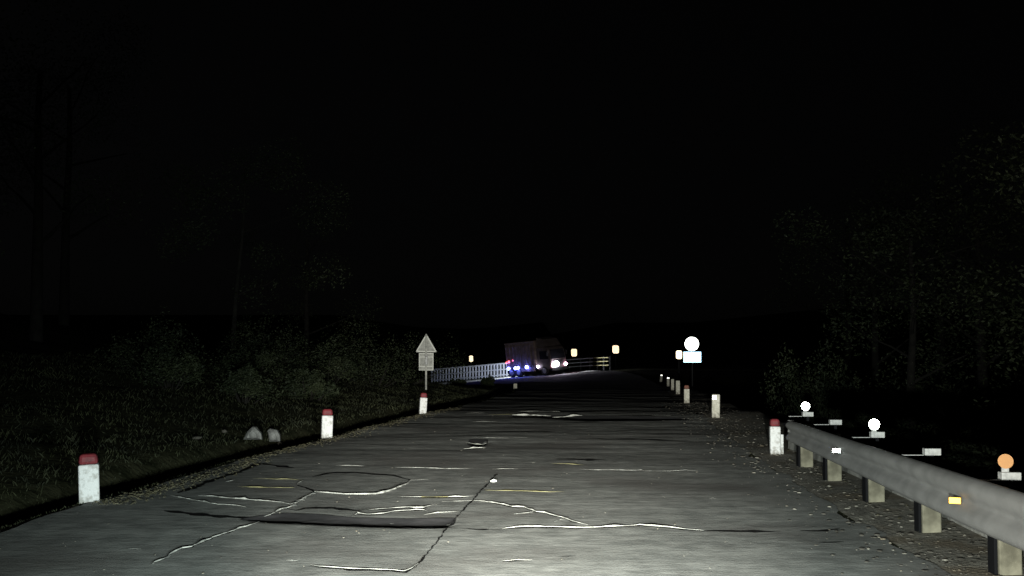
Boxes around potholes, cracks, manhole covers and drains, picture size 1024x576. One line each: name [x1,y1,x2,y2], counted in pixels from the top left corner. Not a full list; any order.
crack [151,463,697,565]
crack [553,459,693,471]
crack [297,560,416,573]
pothole [467,439,488,447]
